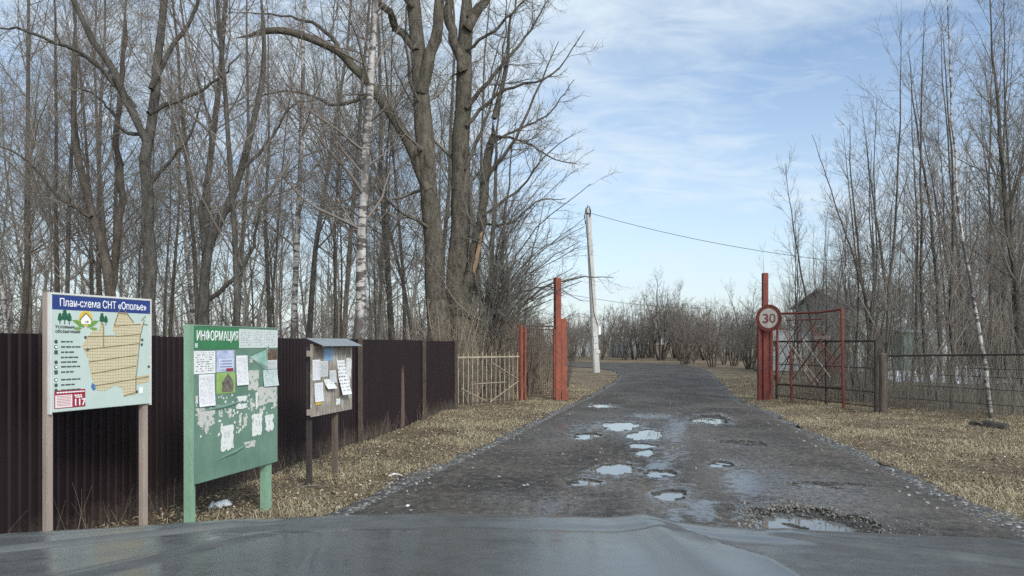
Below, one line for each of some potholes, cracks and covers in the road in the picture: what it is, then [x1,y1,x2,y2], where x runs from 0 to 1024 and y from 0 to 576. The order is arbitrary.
pothole [625,429,663,440]
pothole [573,432,602,440]
pothole [687,414,732,426]
pothole [651,489,688,501]
pothole [564,478,603,486]
pothole [635,448,654,457]
pothole [601,421,641,431]
pothole [584,460,642,478]
pothole [729,498,922,535]
pothole [783,481,870,489]
pothole [643,469,678,479]
